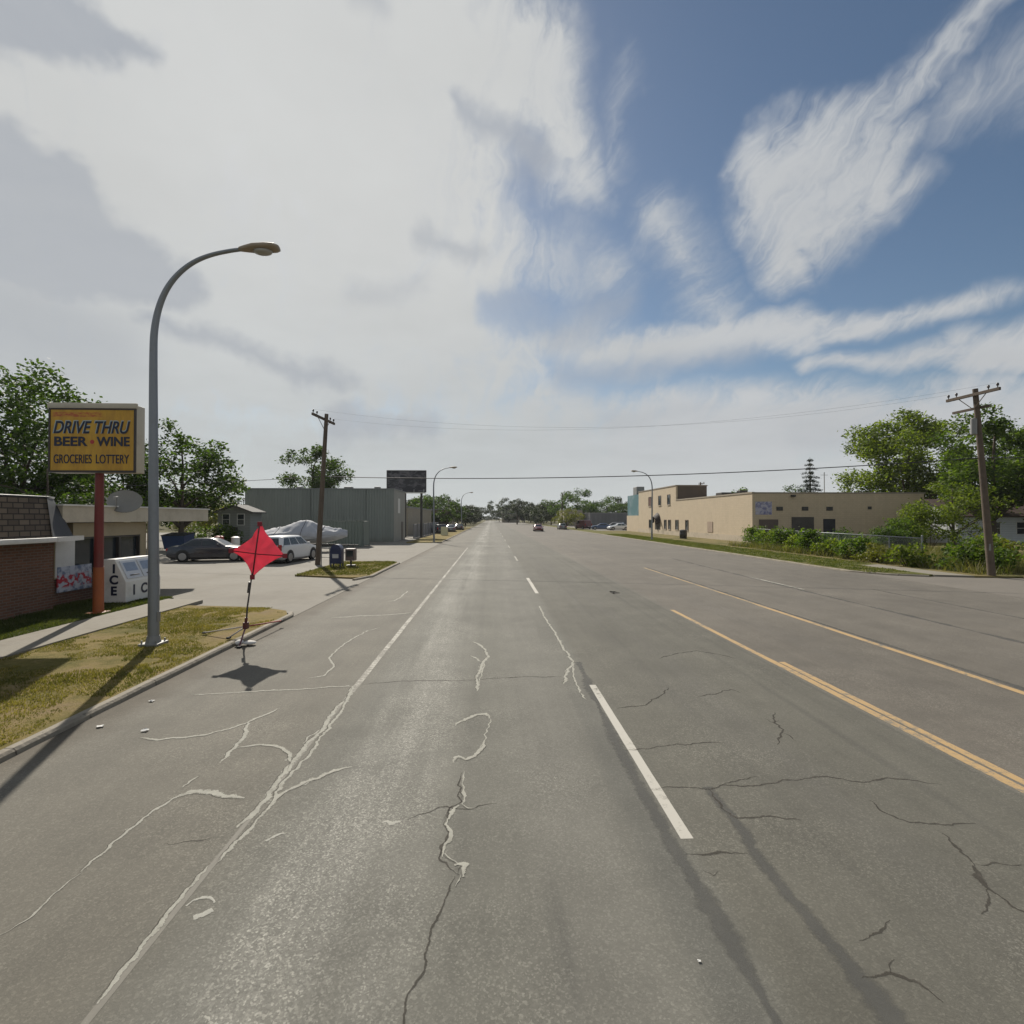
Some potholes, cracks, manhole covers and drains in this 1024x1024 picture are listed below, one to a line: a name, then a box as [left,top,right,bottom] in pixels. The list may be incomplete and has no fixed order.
crack [659,776,942,820]
crack [861,959,943,1002]
crack [0,591,585,1004]
crack [859,920,890,941]
crack [772,714,796,745]
crack [870,800,1024,914]
